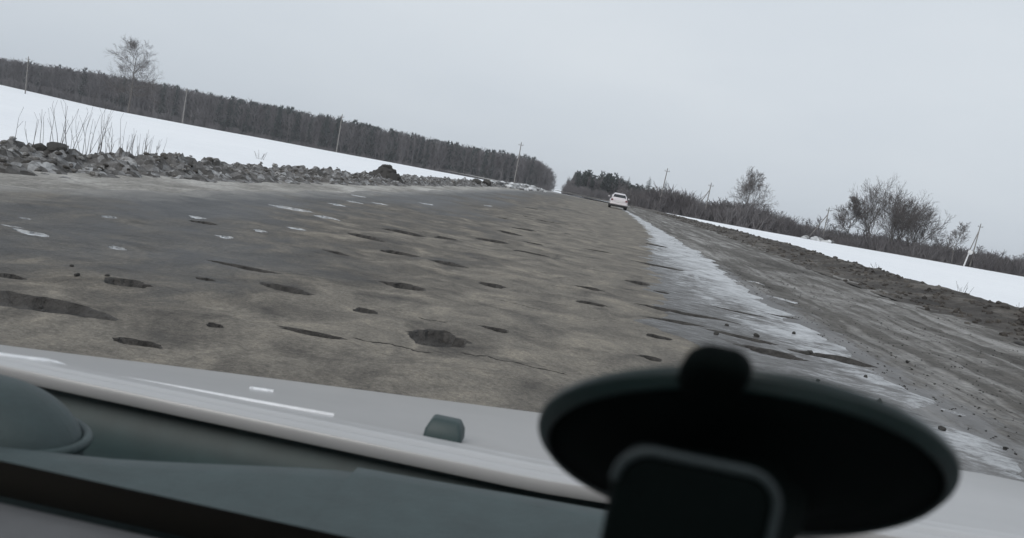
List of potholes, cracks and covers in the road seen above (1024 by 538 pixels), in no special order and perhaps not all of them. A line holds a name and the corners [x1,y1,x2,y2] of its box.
pothole [0,291,119,321]
pothole [405,329,472,348]
crack [355,338,430,353]
pothole [103,277,154,288]
crack [461,352,567,375]
pothole [276,325,348,340]
pothole [207,260,280,274]
pothole [113,337,163,349]
pothole [259,282,314,295]
pothole [374,280,426,291]
